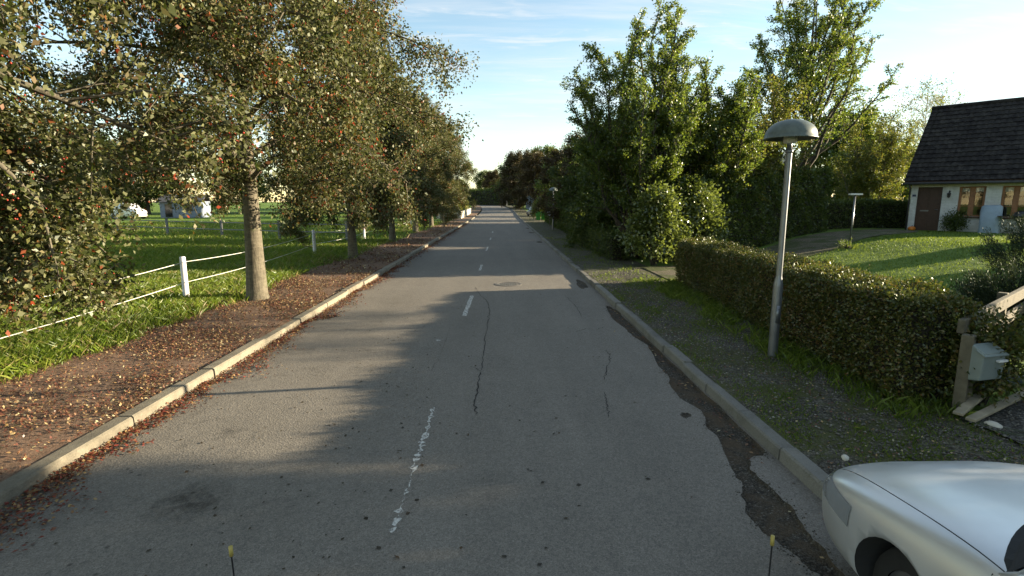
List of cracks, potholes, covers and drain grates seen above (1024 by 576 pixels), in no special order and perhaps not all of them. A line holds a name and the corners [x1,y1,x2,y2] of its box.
pothole [606,306,845,576]
crack [471,290,490,414]
